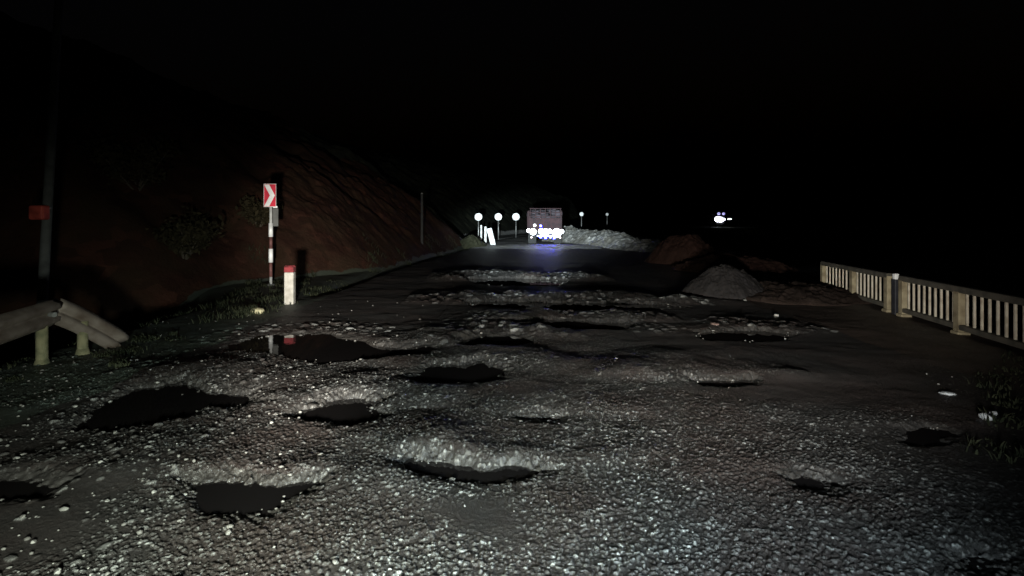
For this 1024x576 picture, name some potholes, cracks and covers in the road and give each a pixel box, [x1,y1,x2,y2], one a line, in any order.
pothole [449,328,537,347]
pothole [887,421,964,448]
pothole [506,405,575,425]
pothole [386,443,565,486]
pothole [391,353,519,388]
pothole [225,330,425,365]
pothole [64,372,279,434]
pothole [680,370,764,388]
pothole [689,325,802,343]
pothole [272,389,395,427]
pothole [772,465,854,497]
